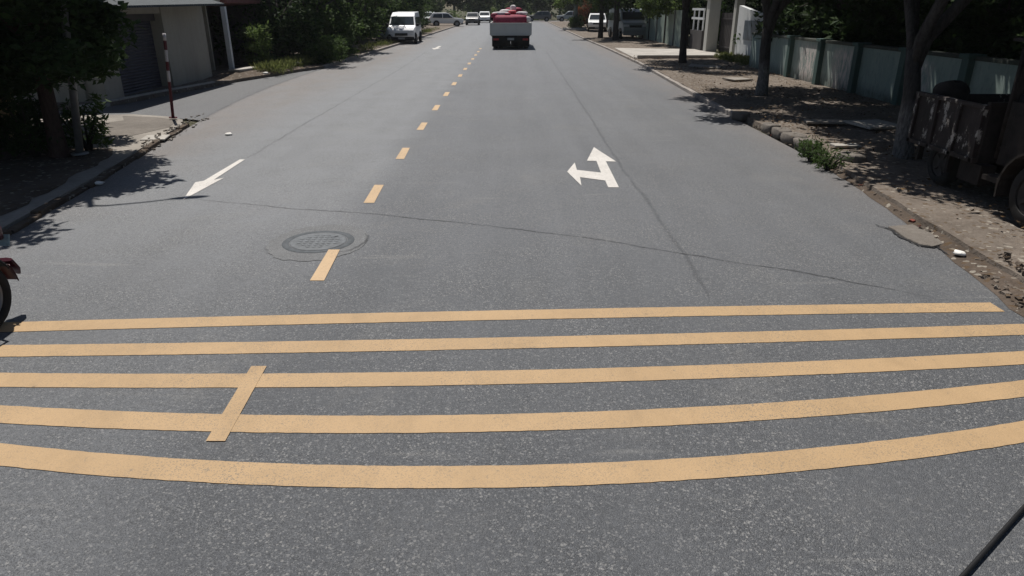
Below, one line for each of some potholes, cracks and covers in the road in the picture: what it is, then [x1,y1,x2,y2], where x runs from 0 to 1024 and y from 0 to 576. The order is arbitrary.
manhole cover [266,224,369,261]
